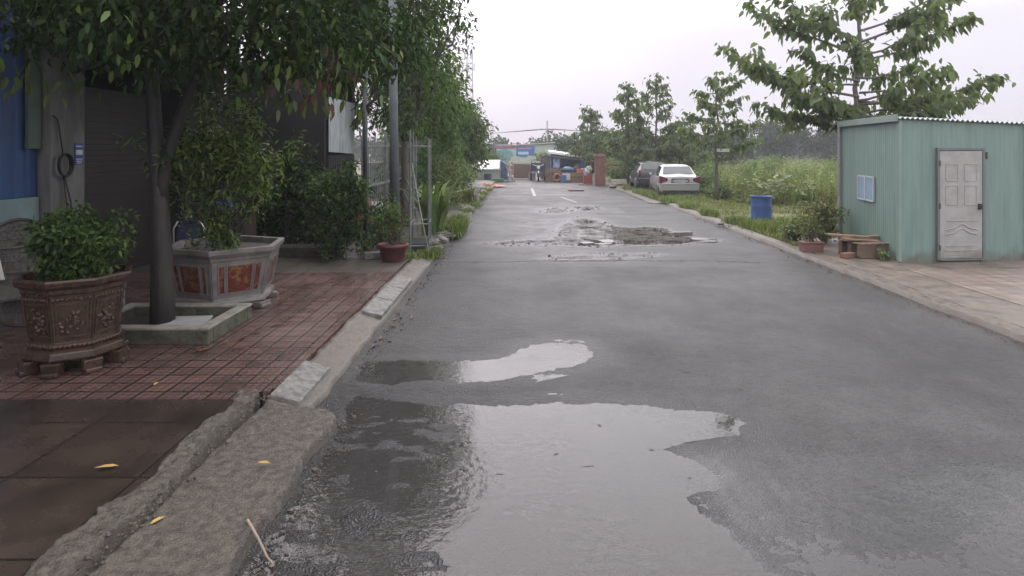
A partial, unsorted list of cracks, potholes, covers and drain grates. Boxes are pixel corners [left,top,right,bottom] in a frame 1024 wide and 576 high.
pothole [482,217,726,248]
